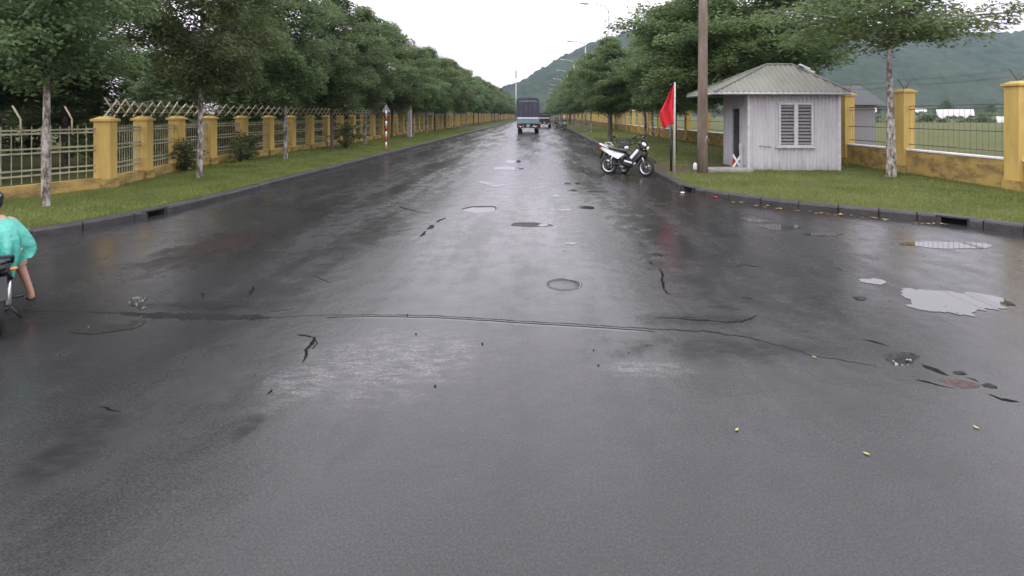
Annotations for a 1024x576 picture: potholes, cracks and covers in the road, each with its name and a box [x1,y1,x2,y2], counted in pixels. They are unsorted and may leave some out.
crack [647,262,672,296]
crack [668,297,757,323]
drain grate [934,212,976,227]
crack [399,206,446,237]
crack [296,334,318,363]
pothole [880,351,921,366]
manhole cover [546,278,582,291]
drain grate [131,206,170,219]
crack [864,339,1019,402]
